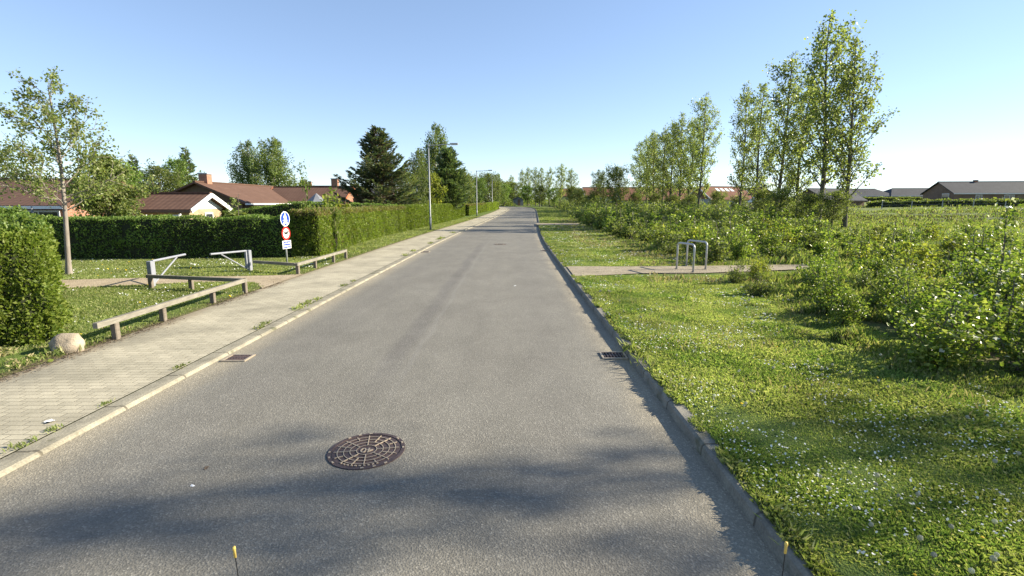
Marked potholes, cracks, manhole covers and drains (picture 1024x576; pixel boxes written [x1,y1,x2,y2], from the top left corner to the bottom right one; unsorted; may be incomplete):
drain grate [599,351,629,360]
drain grate [220,354,256,362]
manhole cover [327,433,405,470]
